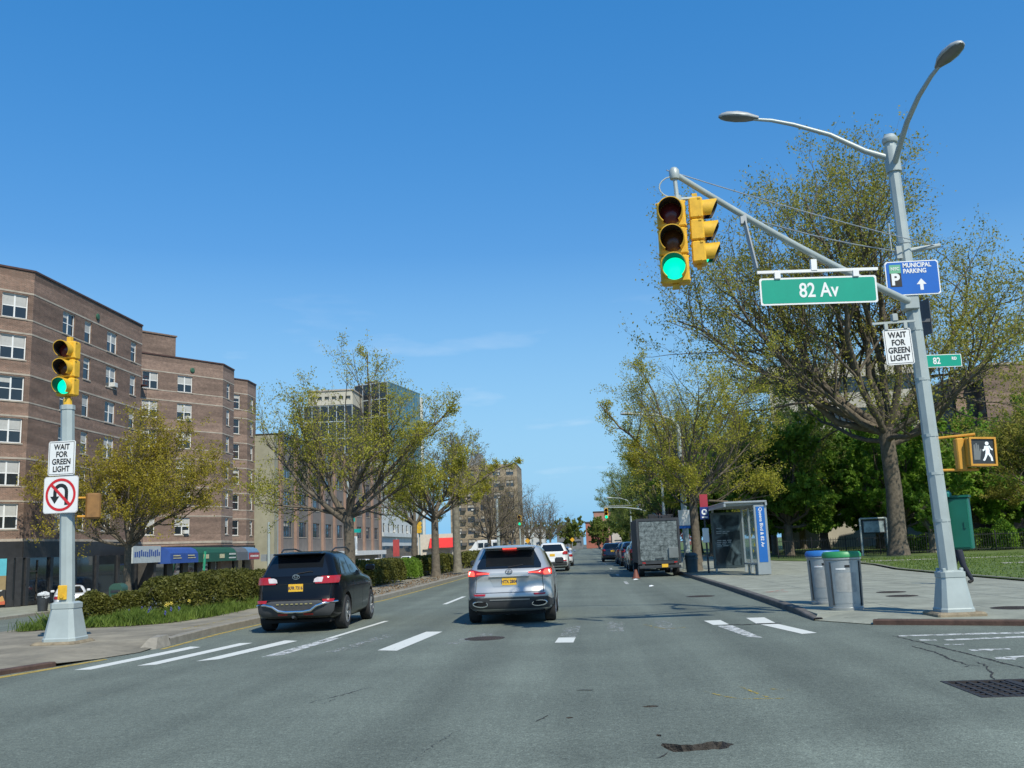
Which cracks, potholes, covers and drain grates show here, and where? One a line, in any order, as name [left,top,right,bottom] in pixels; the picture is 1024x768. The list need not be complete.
crack [898,636,1024,679]
drain grate [940,679,1024,698]
pothole [661,741,734,752]
